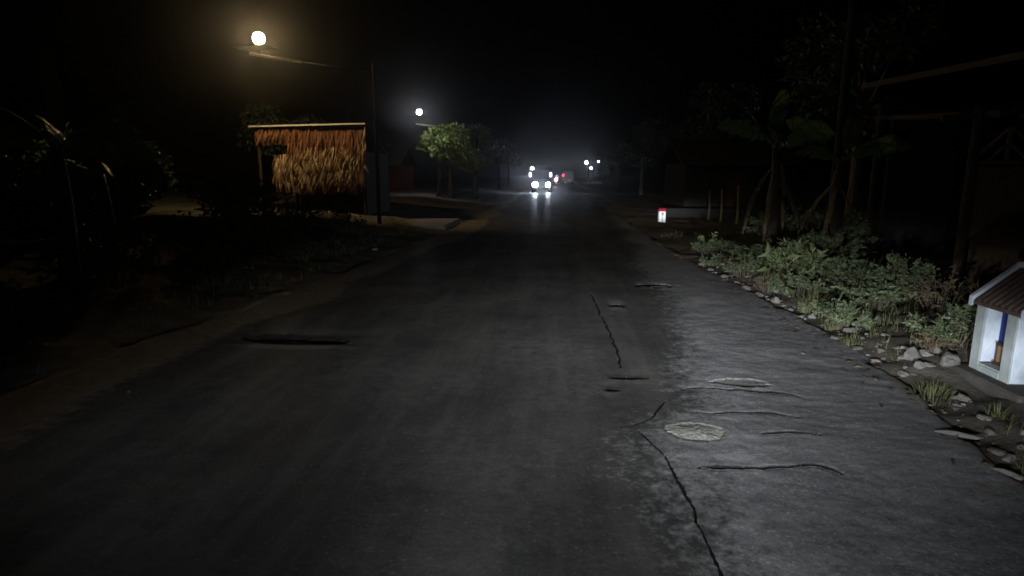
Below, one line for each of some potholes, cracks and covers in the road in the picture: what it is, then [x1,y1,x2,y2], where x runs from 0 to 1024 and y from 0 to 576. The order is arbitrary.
crack [589,294,623,367]
crack [621,387,842,576]
pothole [237,333,353,346]
